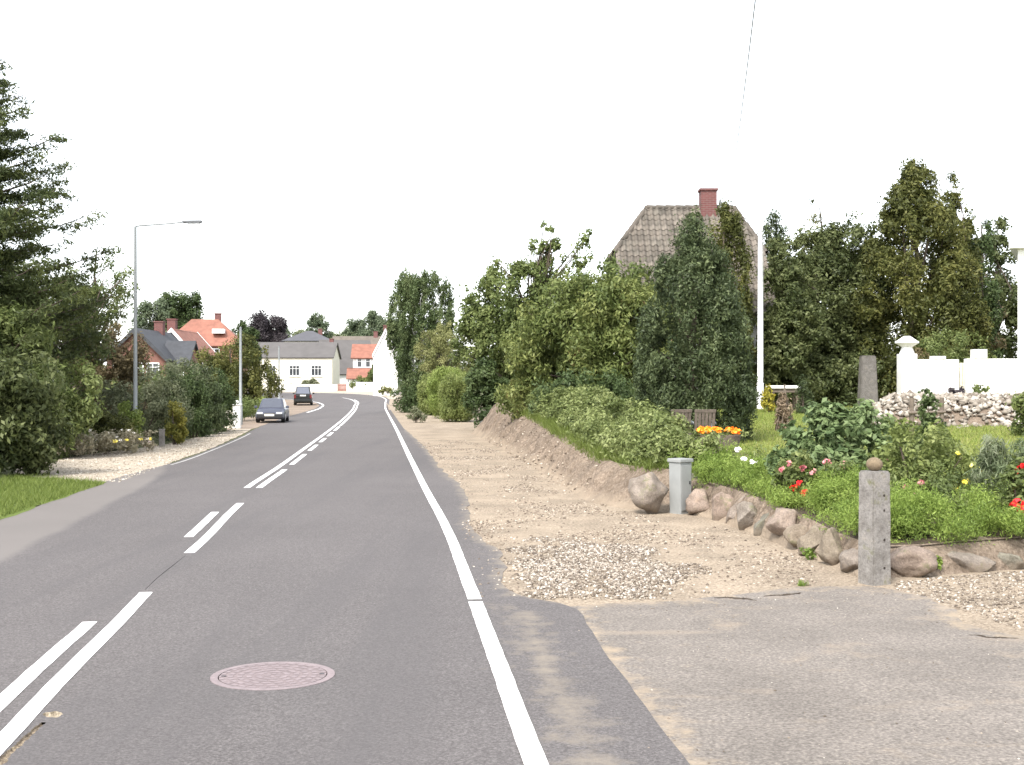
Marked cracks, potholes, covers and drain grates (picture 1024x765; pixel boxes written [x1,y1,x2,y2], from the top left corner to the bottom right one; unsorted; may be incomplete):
crack [0,723,43,765]
manhole cover [210,662,335,690]
